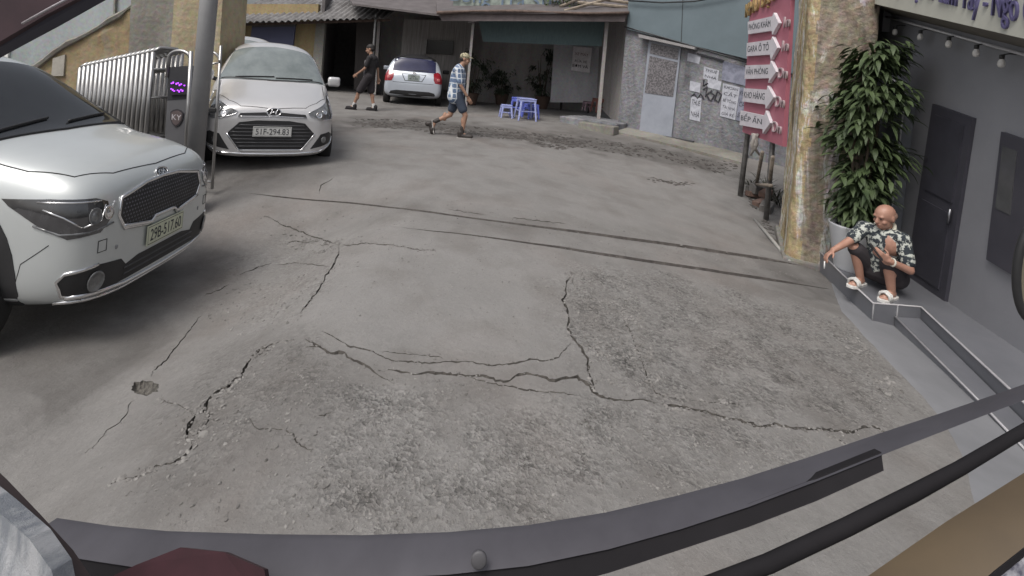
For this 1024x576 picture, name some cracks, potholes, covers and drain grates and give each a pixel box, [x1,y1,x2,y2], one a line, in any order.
pothole [131,380,159,396]
crack [111,340,288,484]
crack [306,275,885,444]
crack [151,315,202,376]
crack [206,219,434,312]
